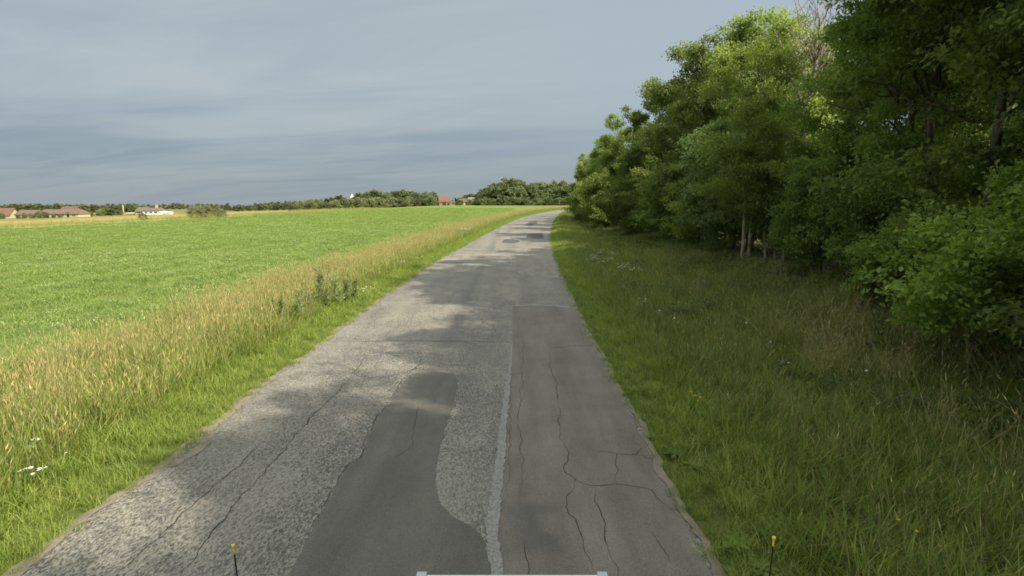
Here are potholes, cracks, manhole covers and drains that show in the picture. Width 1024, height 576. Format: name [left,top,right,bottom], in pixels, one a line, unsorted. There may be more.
crack [118,363,362,574]
crack [507,342,525,492]
crack [549,355,682,570]
crack [302,351,422,540]
